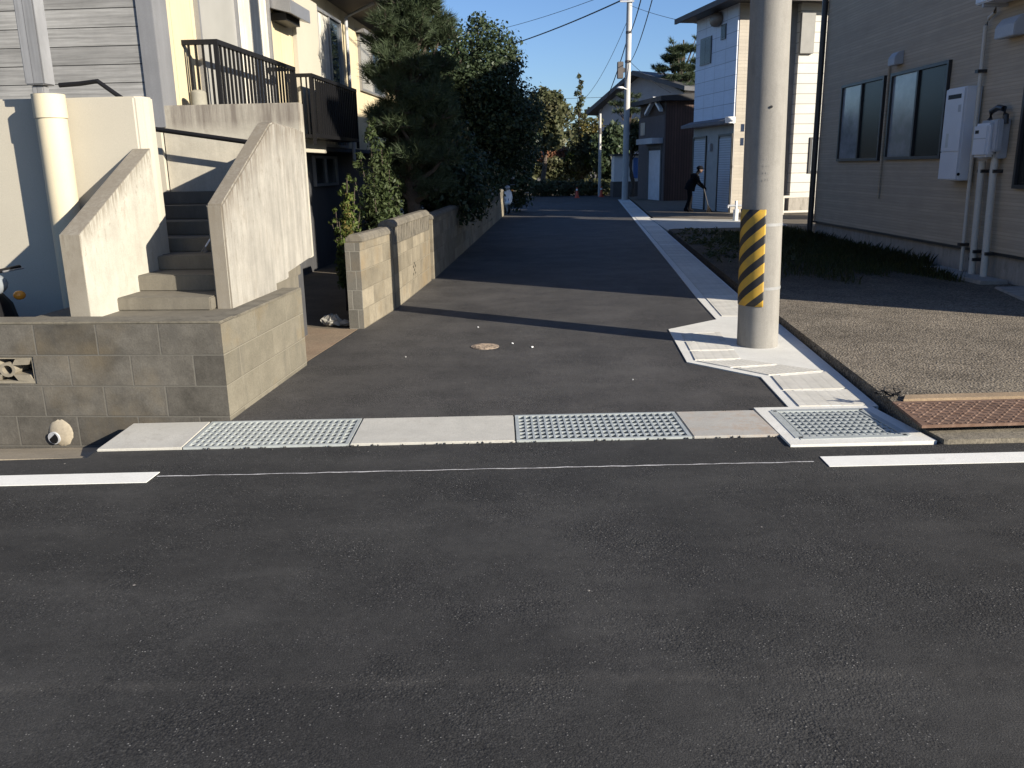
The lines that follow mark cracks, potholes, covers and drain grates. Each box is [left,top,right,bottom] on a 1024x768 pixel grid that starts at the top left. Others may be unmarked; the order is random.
drain grate [515,412,692,442]
drain grate [183,418,362,450]
